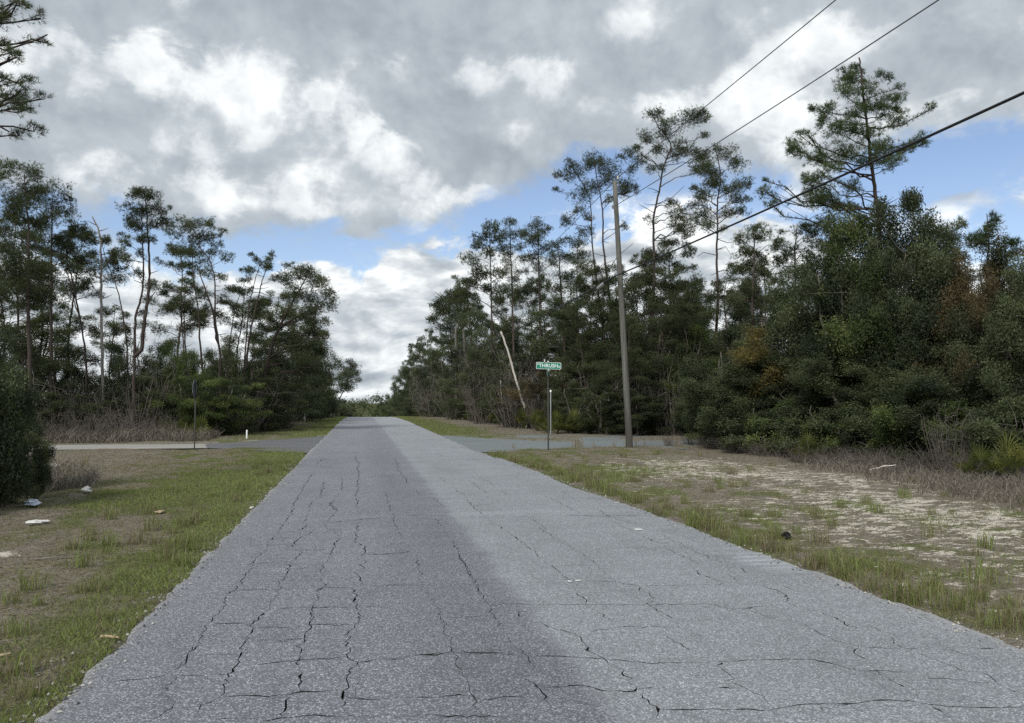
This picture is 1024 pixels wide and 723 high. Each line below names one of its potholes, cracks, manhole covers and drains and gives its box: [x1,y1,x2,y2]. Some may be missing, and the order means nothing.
crack [115,459,1023,722]
